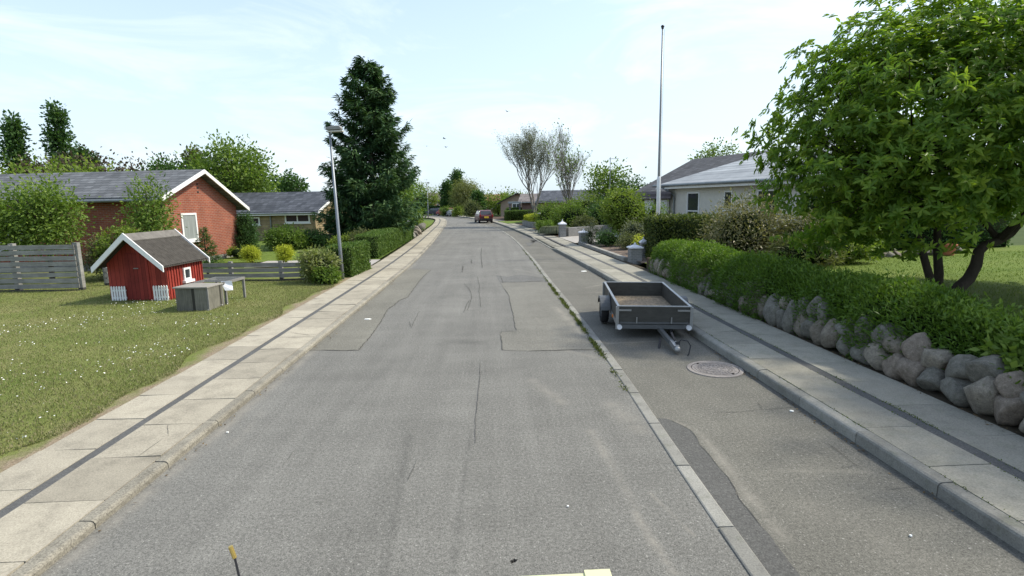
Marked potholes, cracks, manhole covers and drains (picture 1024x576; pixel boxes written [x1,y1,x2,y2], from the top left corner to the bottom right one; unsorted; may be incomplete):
crack [359,268,428,349]
manhole cover [687,361,744,378]
